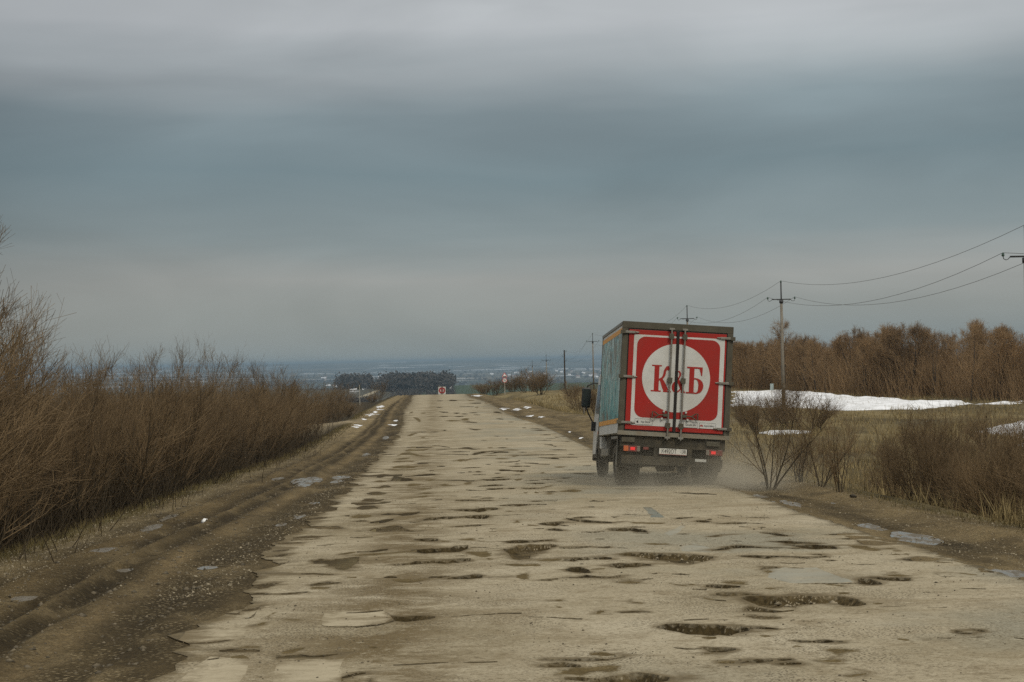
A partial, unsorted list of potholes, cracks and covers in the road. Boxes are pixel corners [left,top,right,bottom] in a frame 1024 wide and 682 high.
pothole [411,545,468,553]
pothole [564,672,670,682]
pothole [741,595,866,608]
pothole [618,552,713,564]
pothole [503,544,557,560]
pothole [656,623,749,636]
